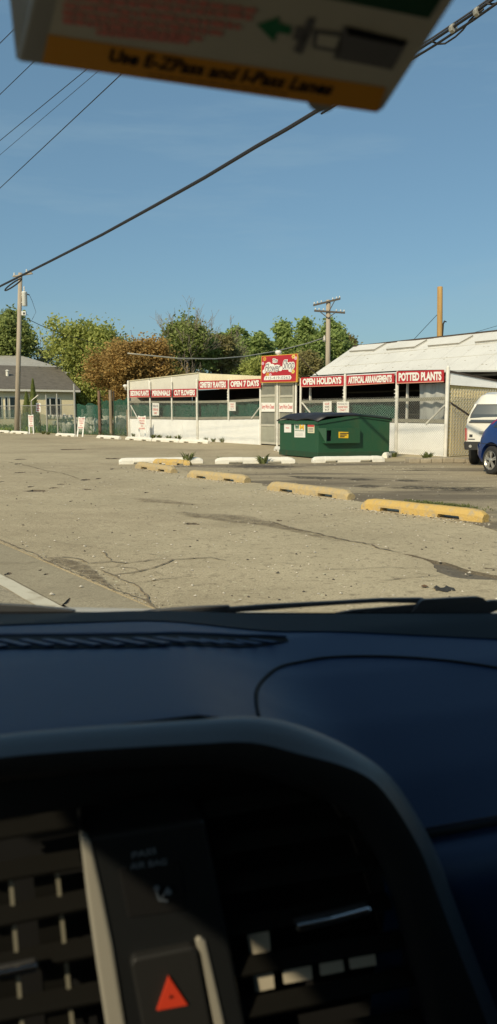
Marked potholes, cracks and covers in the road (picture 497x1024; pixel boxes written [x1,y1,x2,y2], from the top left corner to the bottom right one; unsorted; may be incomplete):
crack [71,538,224,605]
